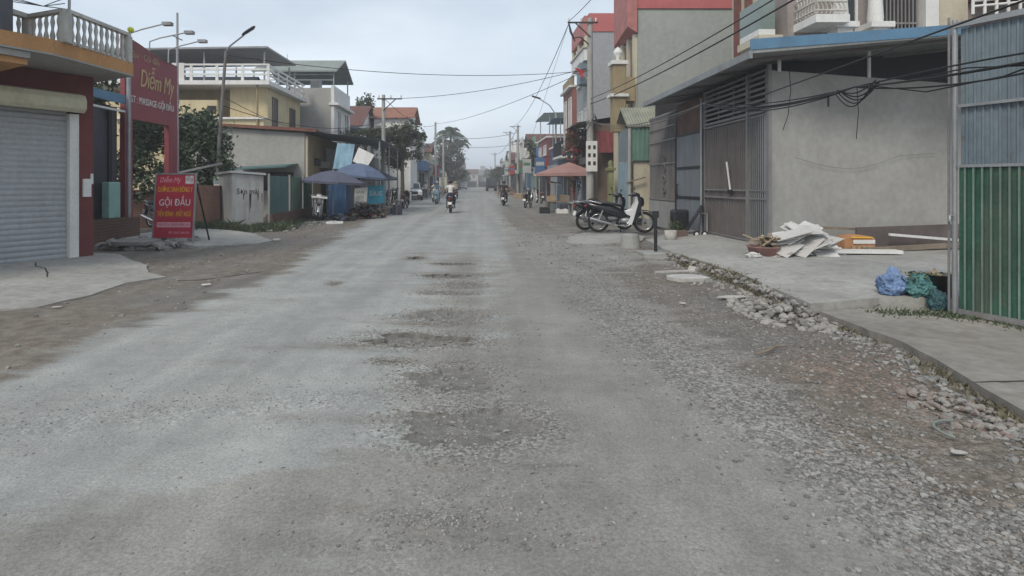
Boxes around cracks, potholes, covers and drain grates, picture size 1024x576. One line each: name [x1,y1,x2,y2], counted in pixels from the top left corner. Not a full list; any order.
pothole [362,357,417,366]
pothole [321,326,535,354]
pothole [410,272,489,280]
pothole [368,360,528,403]
pothole [356,392,574,464]
